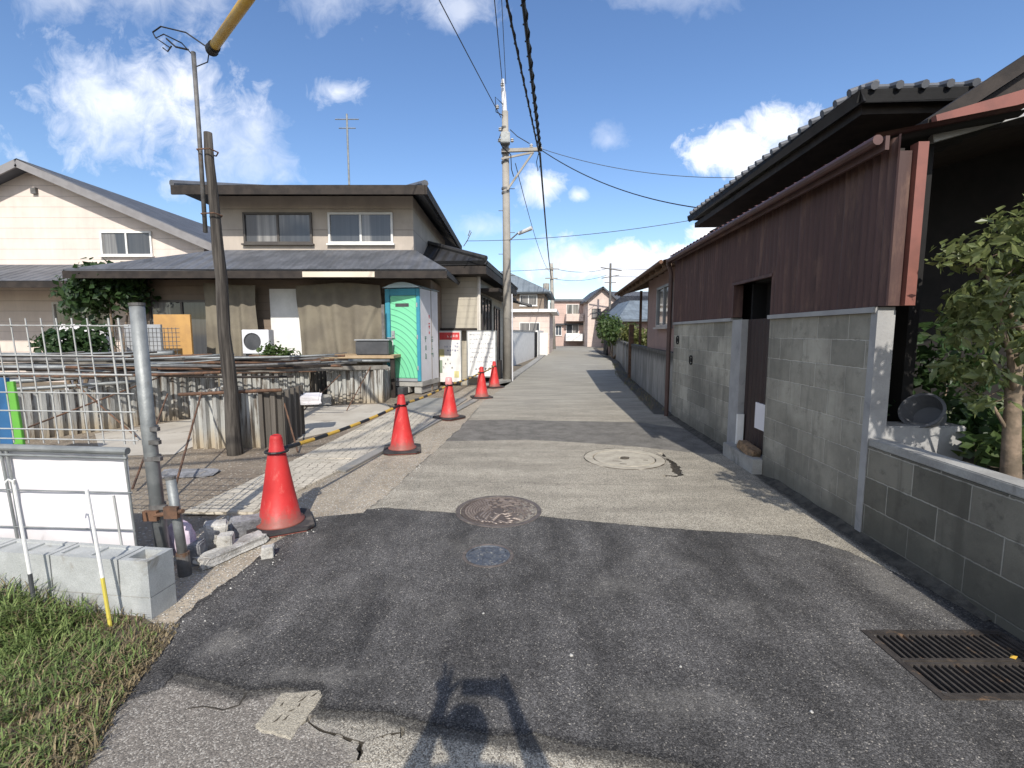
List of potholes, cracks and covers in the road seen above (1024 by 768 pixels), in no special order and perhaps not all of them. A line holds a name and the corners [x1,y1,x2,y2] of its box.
drain grate [860,630,1024,700]
manhole cover [584,448,666,470]
manhole cover [455,495,542,528]
crack [651,453,690,479]
manhole cover [462,544,514,568]
crack [187,693,247,710]
crack [294,711,400,763]
